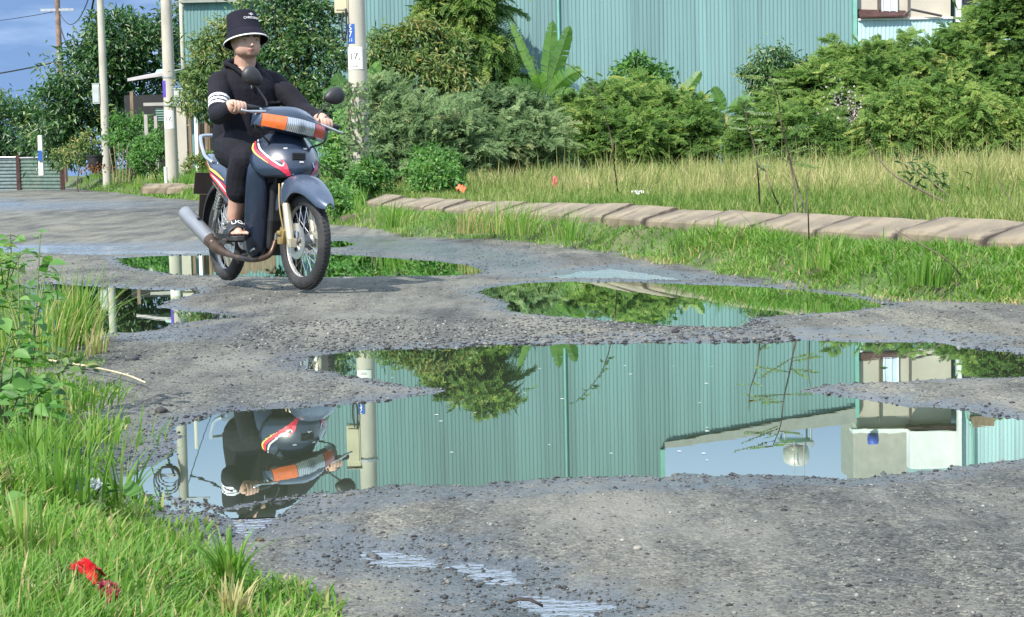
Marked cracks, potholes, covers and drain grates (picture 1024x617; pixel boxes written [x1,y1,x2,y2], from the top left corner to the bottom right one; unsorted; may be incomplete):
pothole [22,283,243,333]
pothole [112,339,1024,518]
pothole [490,583,626,617]
pothole [475,280,888,328]
pothole [383,556,538,587]
pothole [115,253,485,278]
